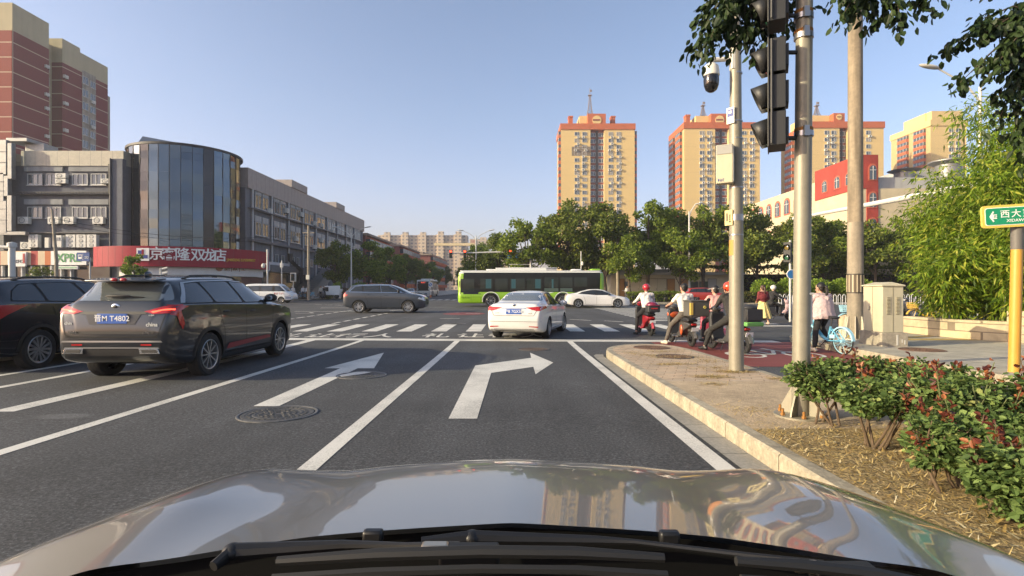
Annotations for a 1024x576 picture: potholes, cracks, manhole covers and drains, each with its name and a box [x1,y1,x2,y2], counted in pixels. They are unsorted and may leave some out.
manhole cover [235,405,318,423]
manhole cover [335,371,387,379]
